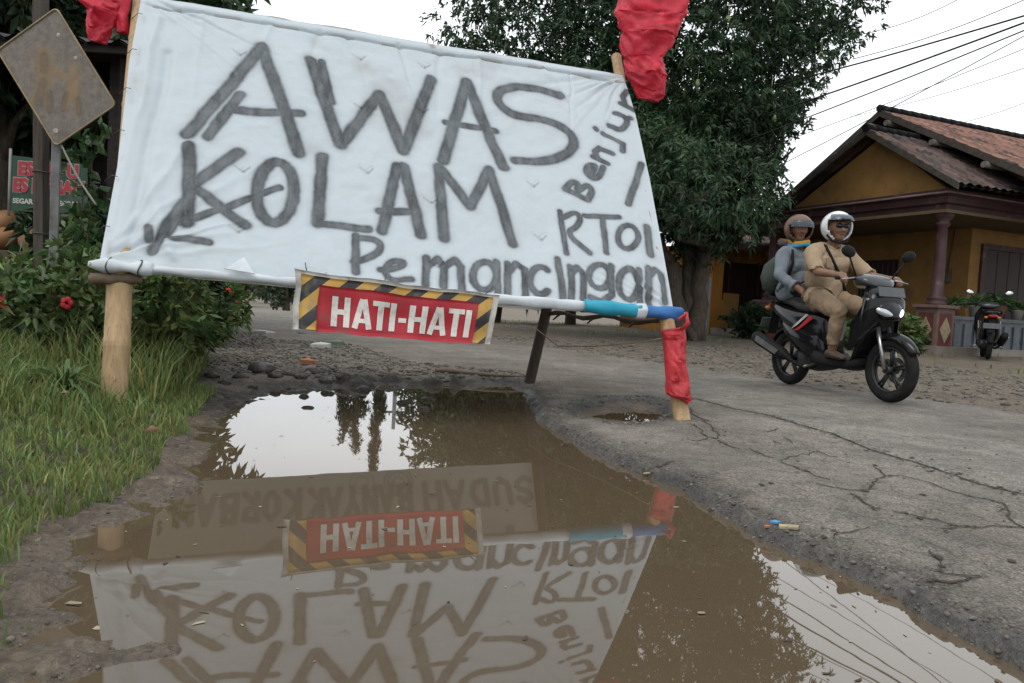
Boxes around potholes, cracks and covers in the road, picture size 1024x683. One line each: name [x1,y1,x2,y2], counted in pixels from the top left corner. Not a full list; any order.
pothole [38,377,1024,683]
crack [687,408,1024,539]
crack [926,549,990,586]
